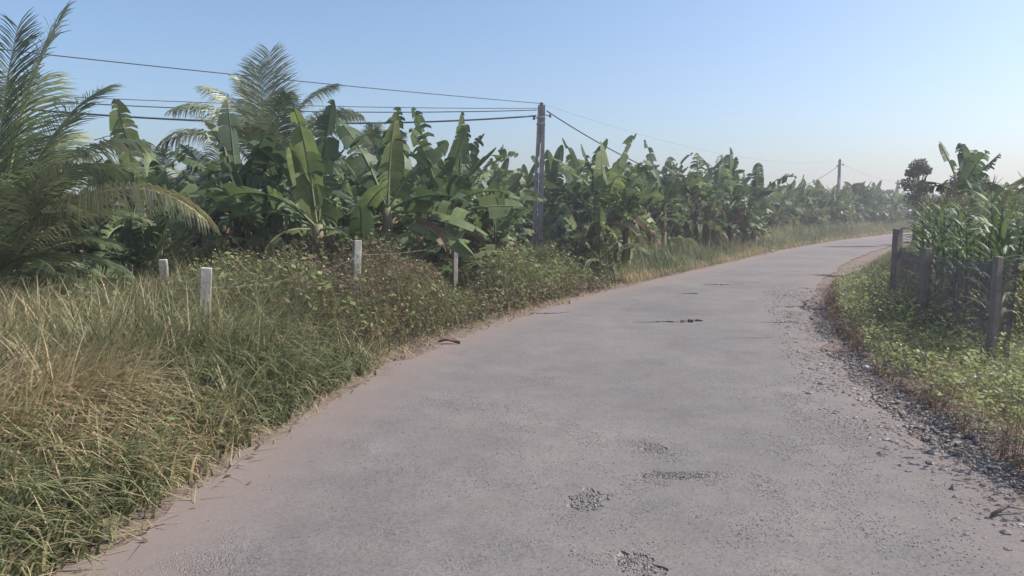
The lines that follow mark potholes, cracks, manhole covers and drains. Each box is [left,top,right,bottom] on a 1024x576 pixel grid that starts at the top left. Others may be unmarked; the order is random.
pothole [623,471,728,480]
pothole [564,487,610,511]
pothole [640,443,667,454]
pothole [614,550,669,576]
